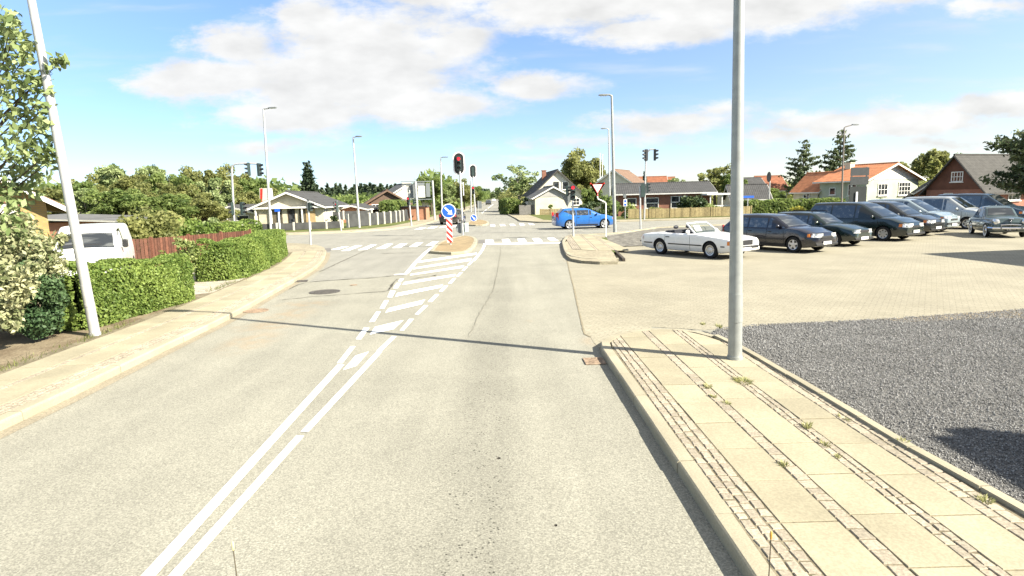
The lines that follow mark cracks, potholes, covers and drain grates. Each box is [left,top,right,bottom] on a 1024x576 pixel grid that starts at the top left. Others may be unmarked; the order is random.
drain grate [583,357,606,365]
